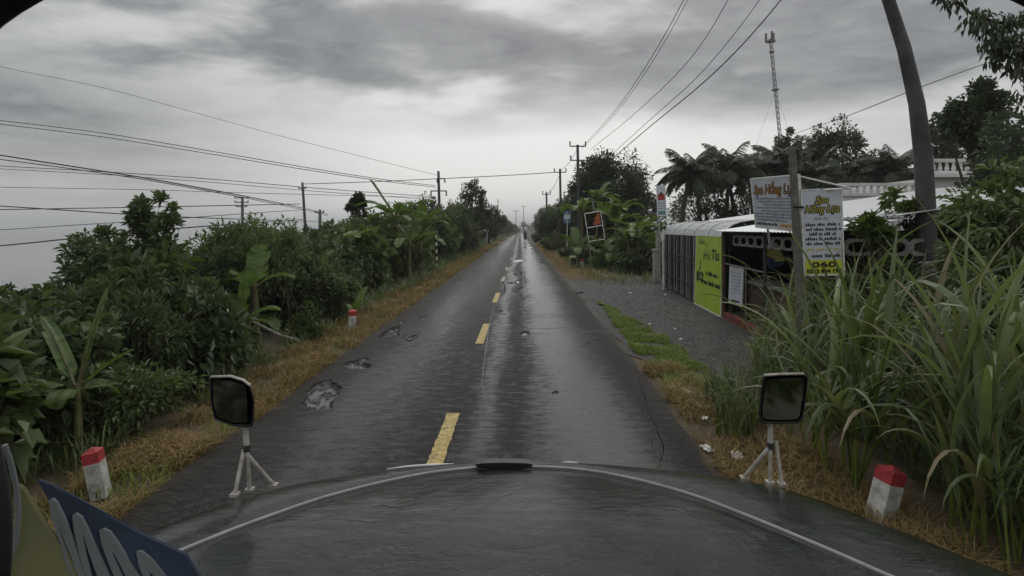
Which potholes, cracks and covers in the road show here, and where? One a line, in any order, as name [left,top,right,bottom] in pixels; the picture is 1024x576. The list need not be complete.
crack [639,381,664,461]
pothole [342,358,372,369]
pothole [300,378,344,411]
pothole [374,319,406,339]
